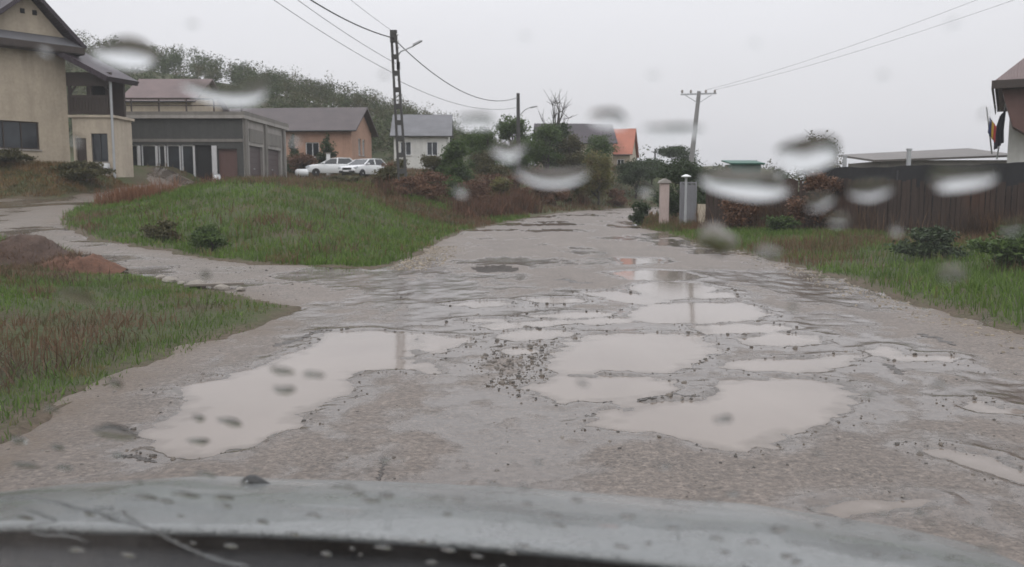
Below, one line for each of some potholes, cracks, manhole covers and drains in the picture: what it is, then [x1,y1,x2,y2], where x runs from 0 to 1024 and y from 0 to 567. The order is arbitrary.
pothole [564,372,888,457]
pothole [120,327,437,461]
pothole [527,330,738,377]
pothole [462,264,525,273]
pothole [617,299,786,326]
pothole [702,351,877,375]
pothole [501,371,697,409]
pothole [691,289,751,301]
pothole [892,440,1024,492]
pothole [571,288,679,305]
pothole [844,343,976,364]
pothole [611,256,673,264]
